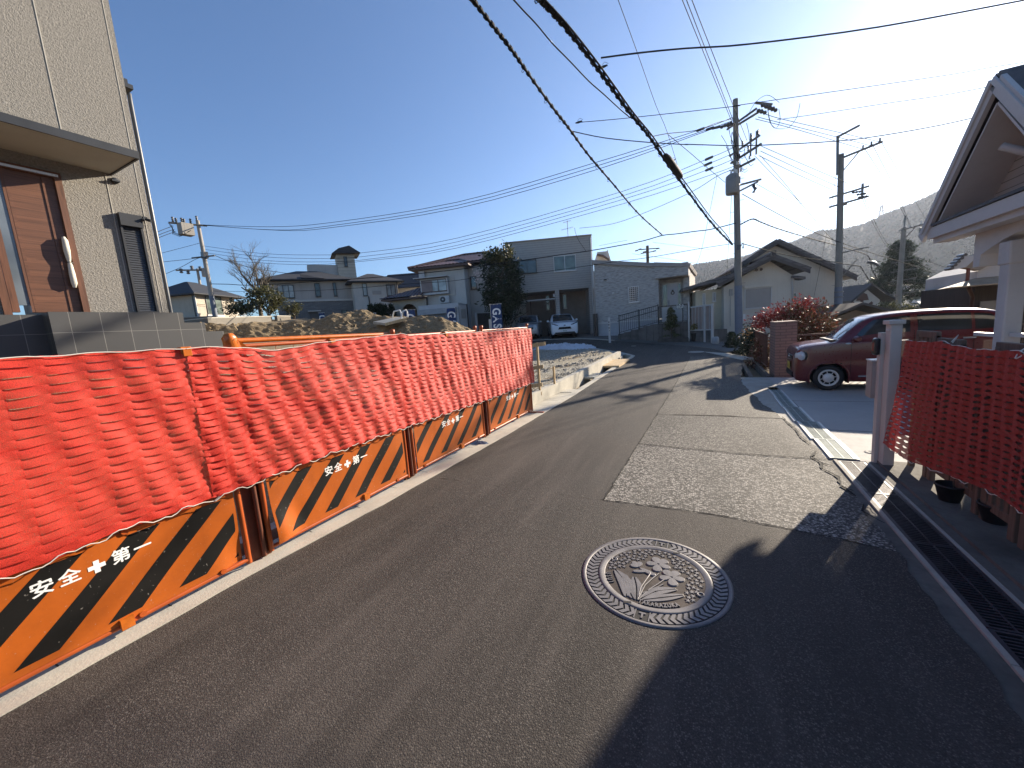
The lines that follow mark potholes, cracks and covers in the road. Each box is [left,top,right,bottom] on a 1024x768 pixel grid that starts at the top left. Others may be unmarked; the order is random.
drain grate [909,541,1024,635]
manhole cover [582,537,734,630]
drain grate [866,492,956,548]
crack [646,417,884,523]
